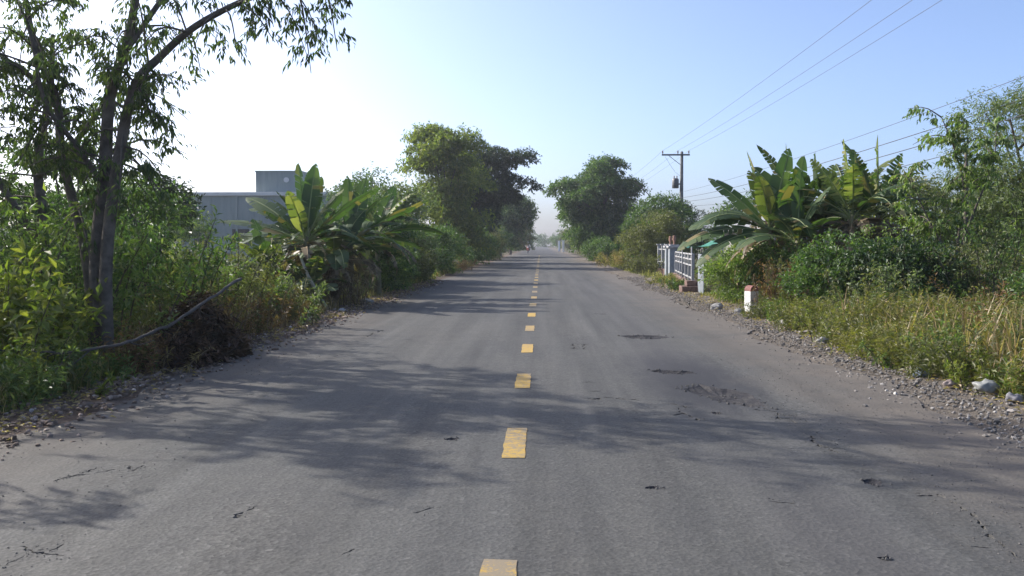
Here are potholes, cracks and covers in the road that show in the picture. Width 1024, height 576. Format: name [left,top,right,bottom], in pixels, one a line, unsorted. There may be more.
crack [53,464,155,482]
crack [5,540,74,568]
pothole [860,477,883,487]
pothole [675,383,778,411]
crack [908,492,1019,559]
